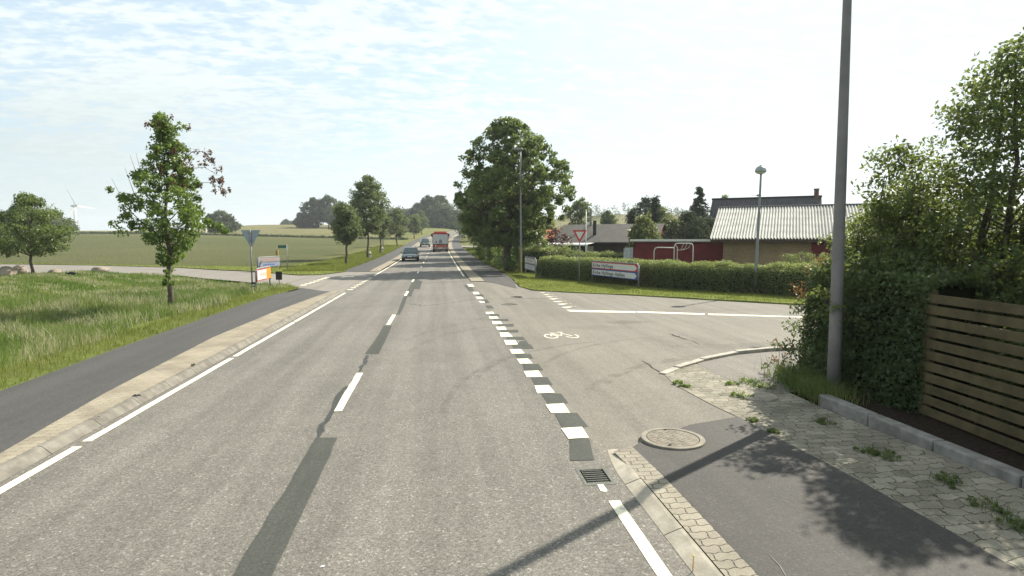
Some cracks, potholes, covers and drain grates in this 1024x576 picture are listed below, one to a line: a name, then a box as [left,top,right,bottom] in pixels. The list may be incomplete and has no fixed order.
drain grate [575,467,617,486]
manhole cover [640,428,705,450]
